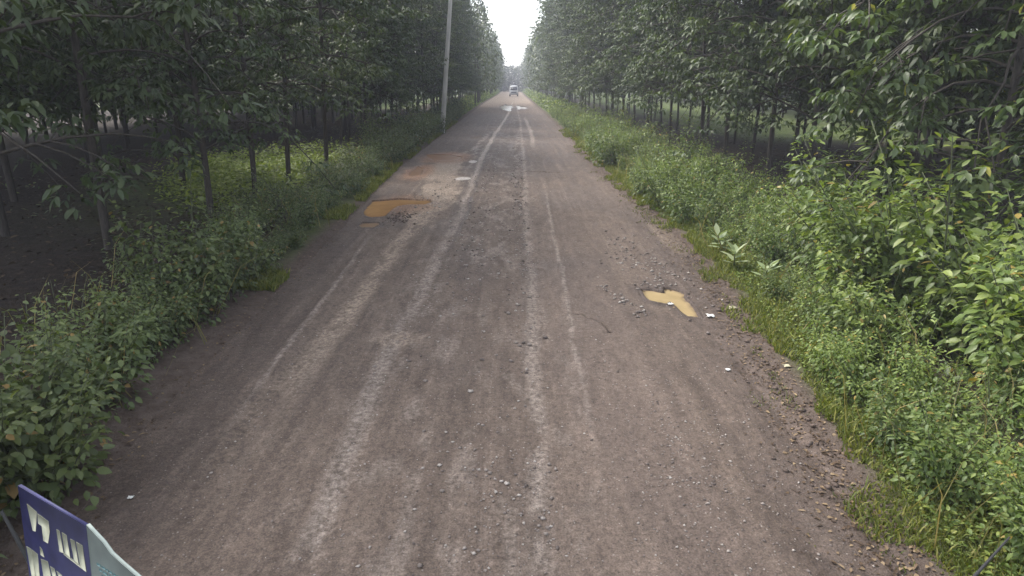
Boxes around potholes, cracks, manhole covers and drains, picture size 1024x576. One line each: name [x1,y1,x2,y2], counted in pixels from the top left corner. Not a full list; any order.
pothole [637,286,704,319]
pothole [359,198,436,218]
